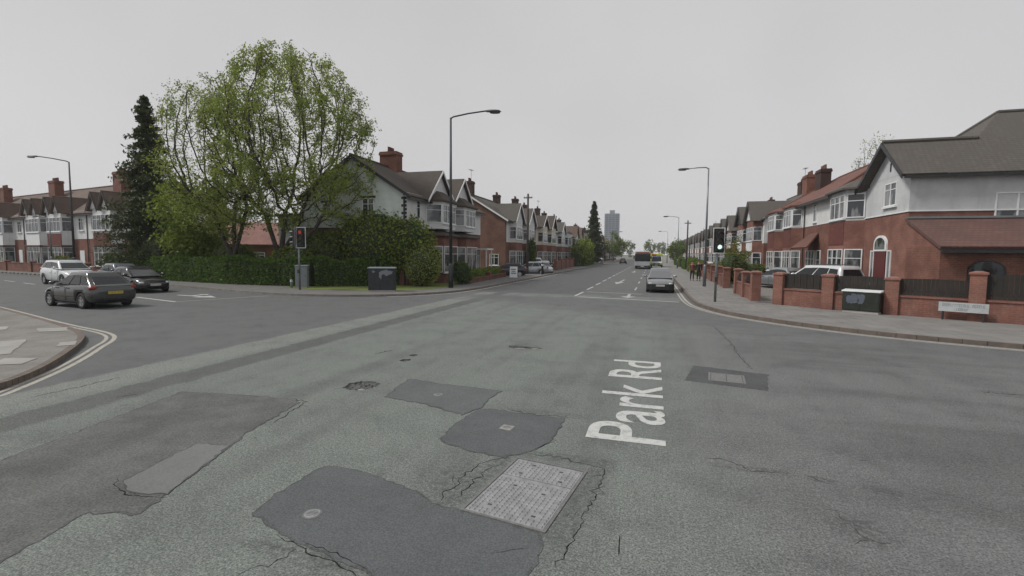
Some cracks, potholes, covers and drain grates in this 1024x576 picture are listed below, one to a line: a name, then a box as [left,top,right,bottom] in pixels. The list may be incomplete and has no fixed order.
crack [442,440,605,565]
manhole cover [708,372,746,384]
crack [237,534,364,576]
manhole cover [460,457,587,534]
pothole [343,381,381,390]
